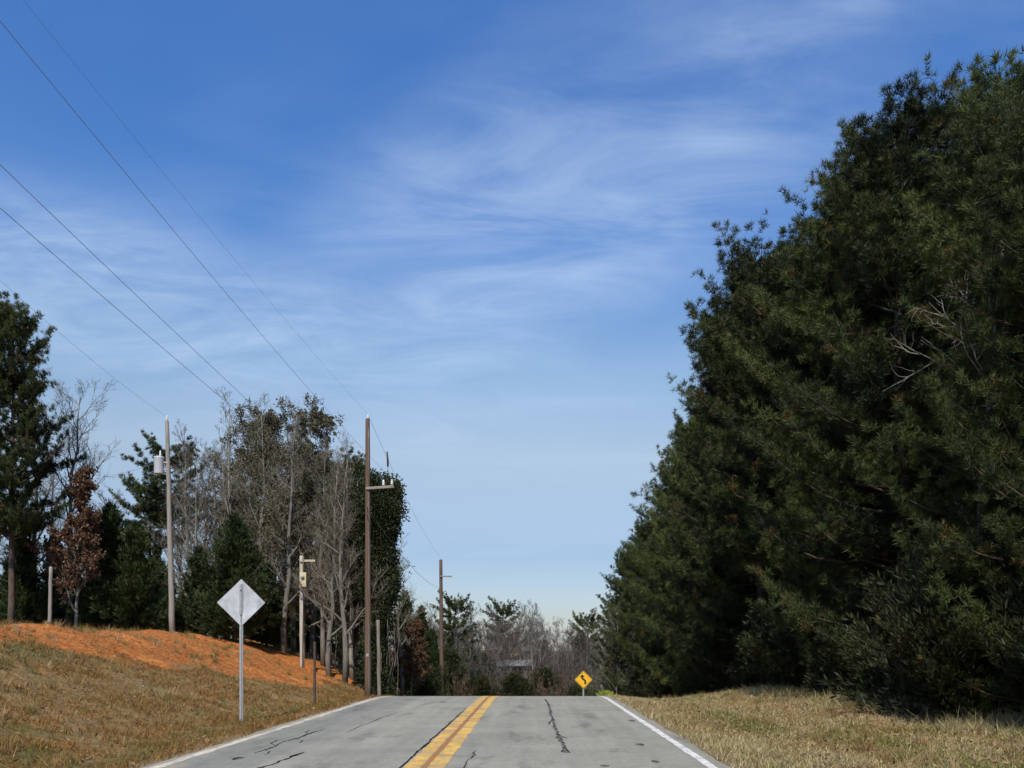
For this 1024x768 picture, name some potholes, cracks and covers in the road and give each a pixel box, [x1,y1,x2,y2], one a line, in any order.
crack [255,728,326,768]
crack [545,699,571,753]
